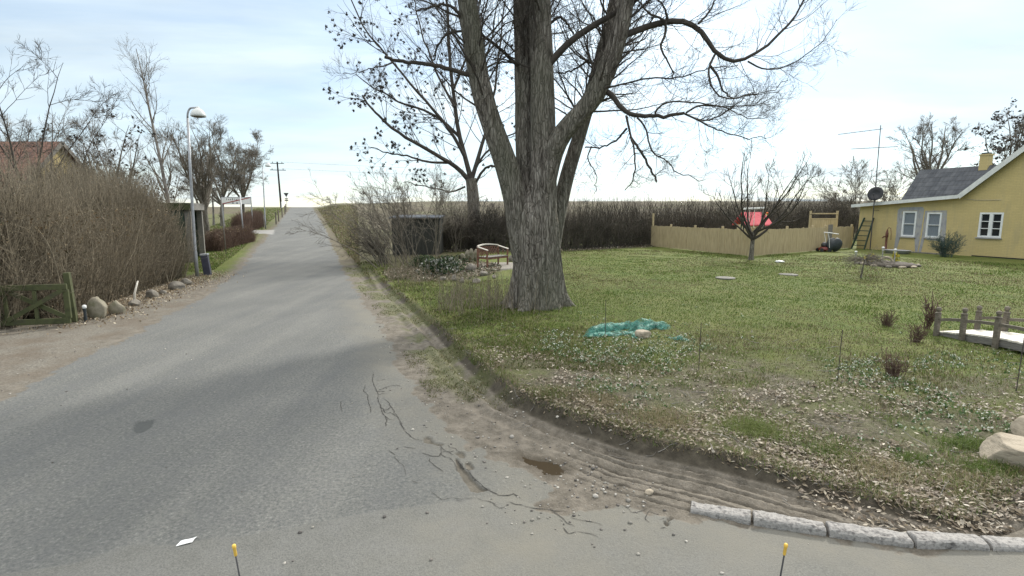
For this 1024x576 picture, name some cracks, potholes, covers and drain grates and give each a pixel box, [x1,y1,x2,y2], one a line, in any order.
crack [363,374,598,537]
